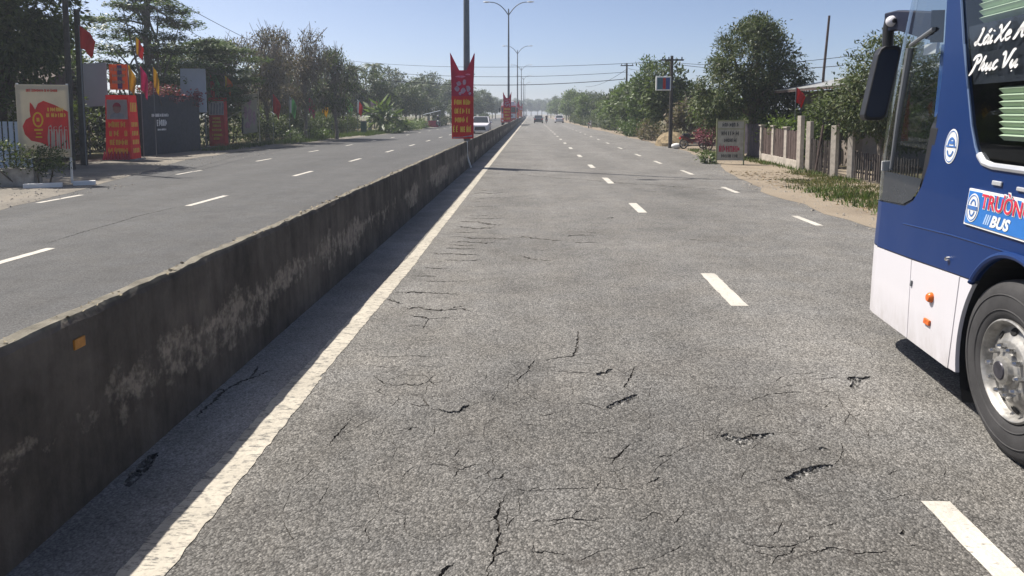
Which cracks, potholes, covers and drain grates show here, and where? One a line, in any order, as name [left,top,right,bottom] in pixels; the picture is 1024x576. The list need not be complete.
crack [281,267,1000,576]
pothole [123,453,158,488]
pothole [721,433,774,447]
pothole [784,464,833,483]
crack [196,367,273,417]
pothole [848,376,870,389]
